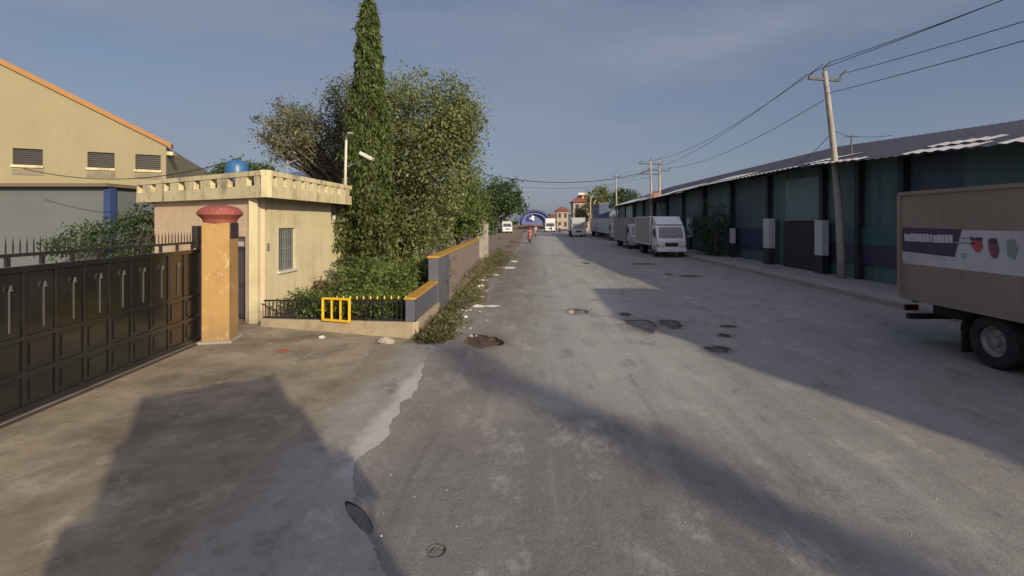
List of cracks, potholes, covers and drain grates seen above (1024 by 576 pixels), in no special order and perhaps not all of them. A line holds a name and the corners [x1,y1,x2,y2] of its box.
pothole [657,320,686,329]
pothole [623,319,657,334]
pothole [463,333,504,349]
pothole [345,502,373,535]
